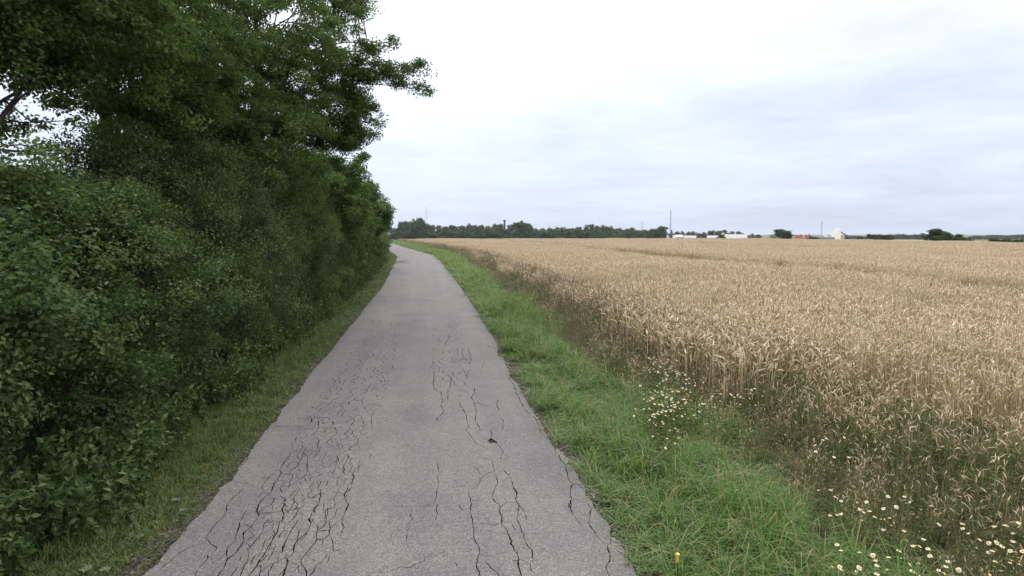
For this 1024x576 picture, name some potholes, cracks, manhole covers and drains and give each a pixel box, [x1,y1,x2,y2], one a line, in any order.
crack [158,318,398,576]
crack [396,463,439,540]
crack [431,323,622,576]
